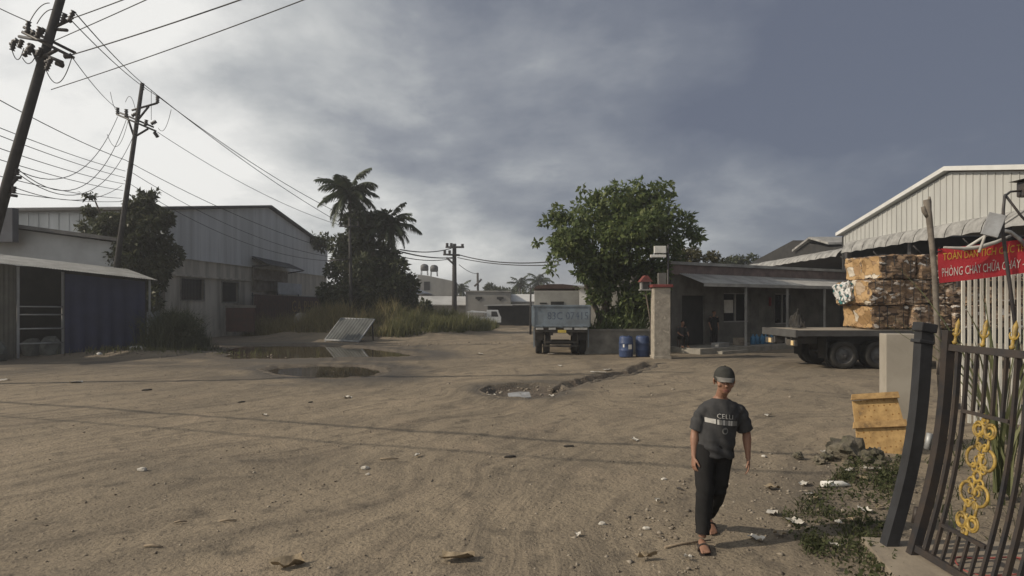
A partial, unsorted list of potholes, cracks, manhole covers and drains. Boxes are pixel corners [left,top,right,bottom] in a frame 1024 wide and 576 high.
pothole [198,343,429,360]
crack [547,362,665,393]
pothole [256,363,392,379]
pothole [478,382,571,399]
